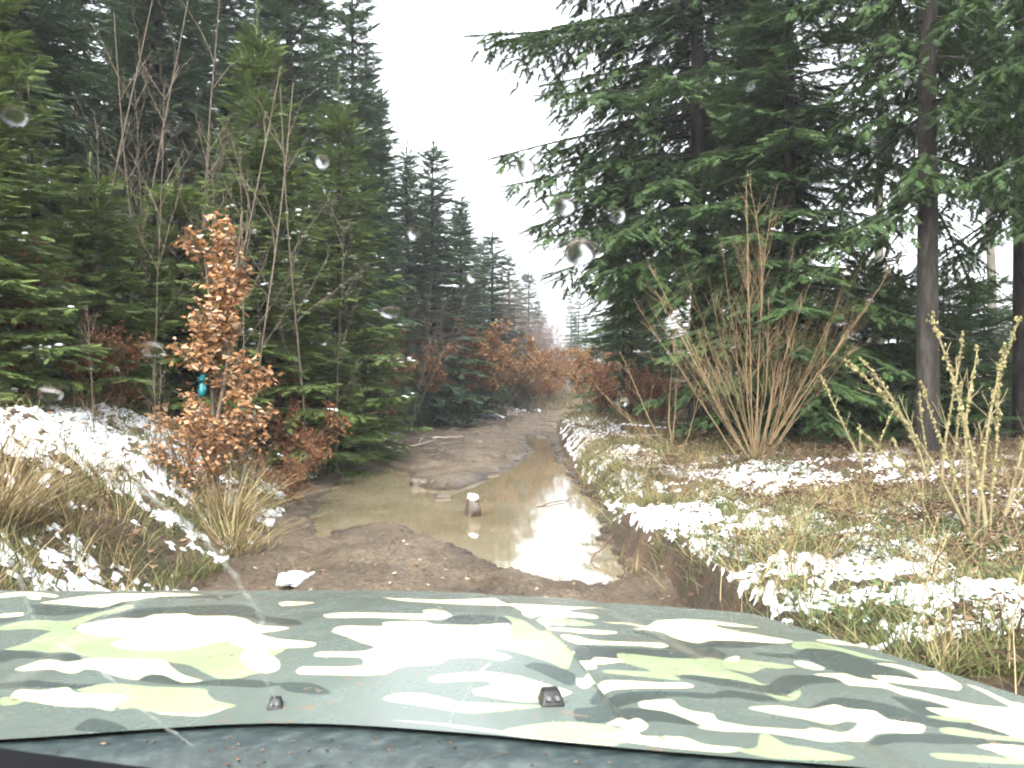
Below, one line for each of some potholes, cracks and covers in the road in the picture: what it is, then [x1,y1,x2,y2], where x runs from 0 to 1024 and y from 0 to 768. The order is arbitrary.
pothole [302,432,633,585]
